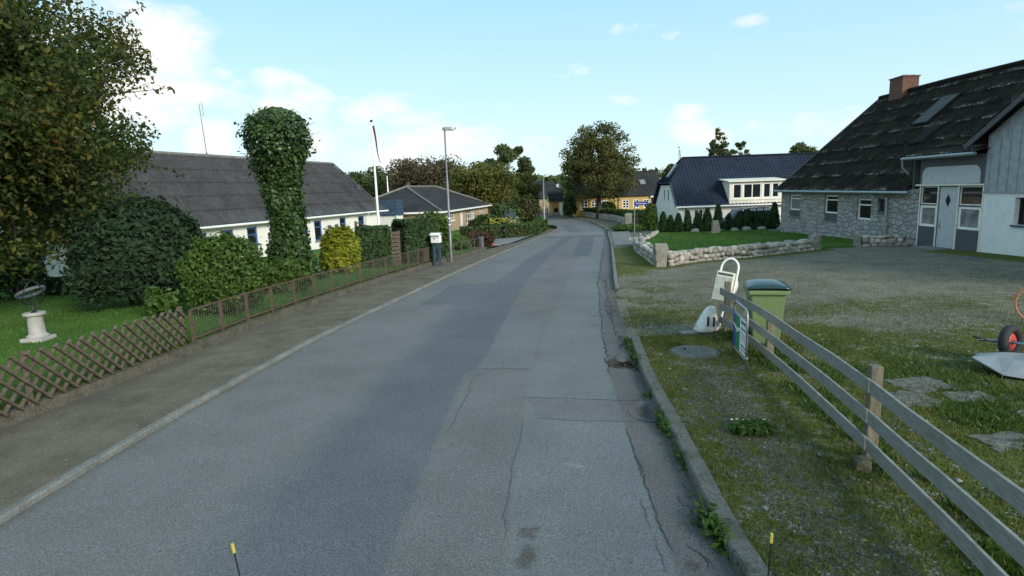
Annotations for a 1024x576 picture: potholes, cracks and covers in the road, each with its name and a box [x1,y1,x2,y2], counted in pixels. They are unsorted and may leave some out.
crack [626,429,714,573]
pothole [607,359,640,371]
manhole cover [669,345,720,359]
crack [589,250,627,373]
